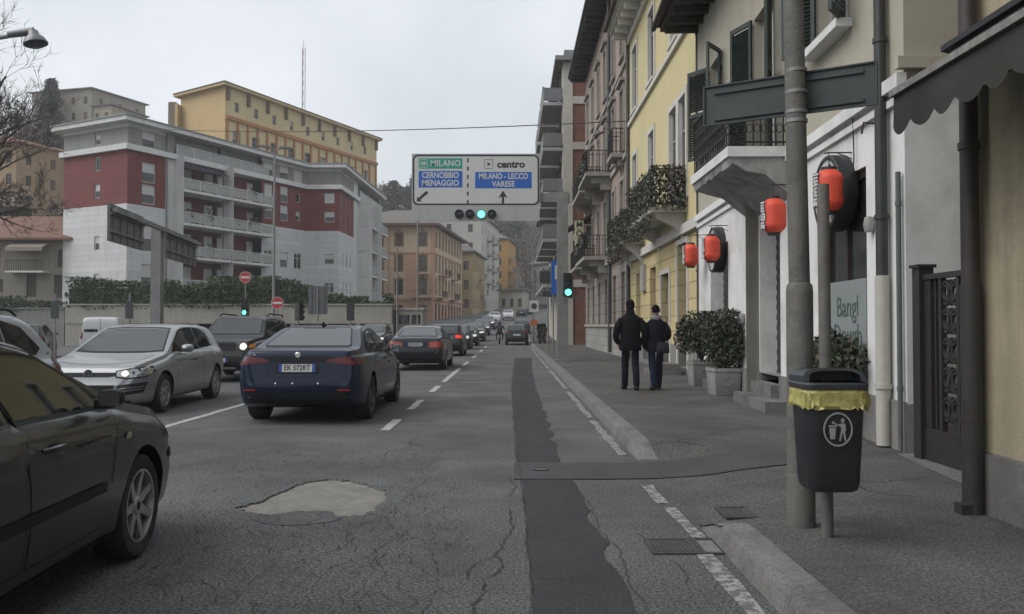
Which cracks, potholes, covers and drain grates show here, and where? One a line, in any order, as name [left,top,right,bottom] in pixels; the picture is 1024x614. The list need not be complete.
crack [1,437,473,614]
crack [465,469,517,614]
